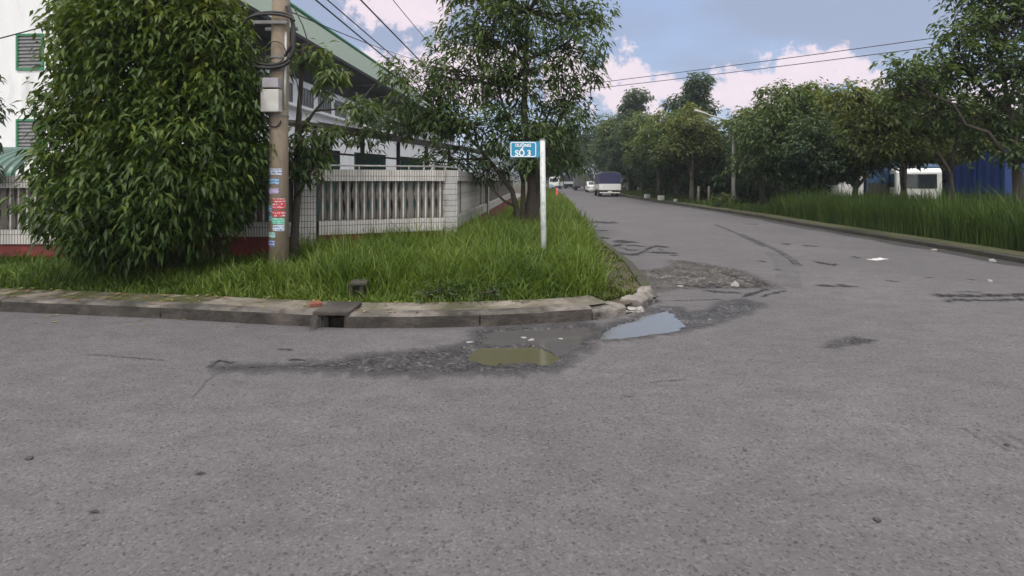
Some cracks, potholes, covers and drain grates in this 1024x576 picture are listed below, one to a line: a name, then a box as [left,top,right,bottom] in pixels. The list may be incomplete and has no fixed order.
pothole [588,299,762,340]
pothole [207,323,600,376]
pothole [639,261,776,291]
drain grate [313,301,362,328]
crack [668,289,785,301]
